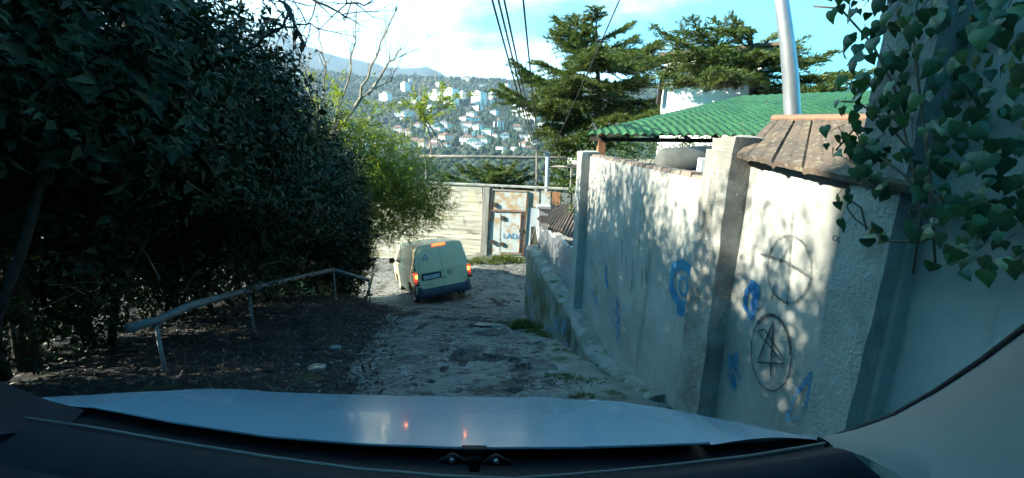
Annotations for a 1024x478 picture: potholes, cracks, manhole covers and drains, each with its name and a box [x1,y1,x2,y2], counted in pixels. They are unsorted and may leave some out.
pothole [448,348,483,367]
